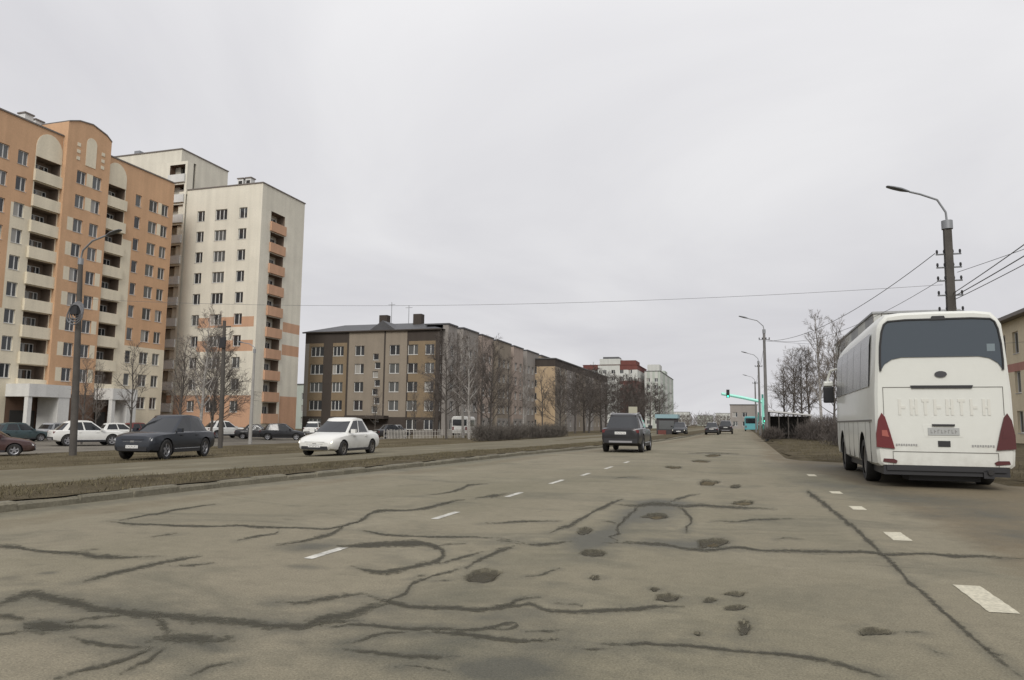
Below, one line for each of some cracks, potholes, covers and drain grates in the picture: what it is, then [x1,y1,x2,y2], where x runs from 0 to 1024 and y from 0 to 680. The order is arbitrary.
pothole [466,568,500,583]
crack [114,484,1022,676]
crack [0,544,207,582]
pothole [699,538,729,548]
pothole [581,549,606,557]
pothole [737,618,750,636]
pothole [860,627,892,636]
pothole [656,593,680,602]
